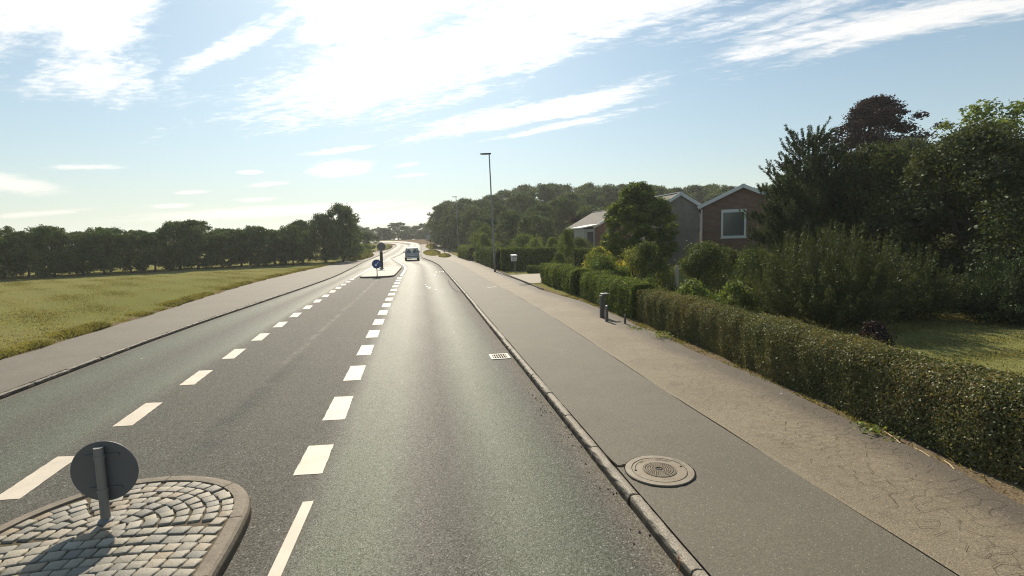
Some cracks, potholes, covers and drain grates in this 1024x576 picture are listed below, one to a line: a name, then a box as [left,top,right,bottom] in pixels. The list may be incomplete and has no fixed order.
manhole cover [624,455,696,487]
